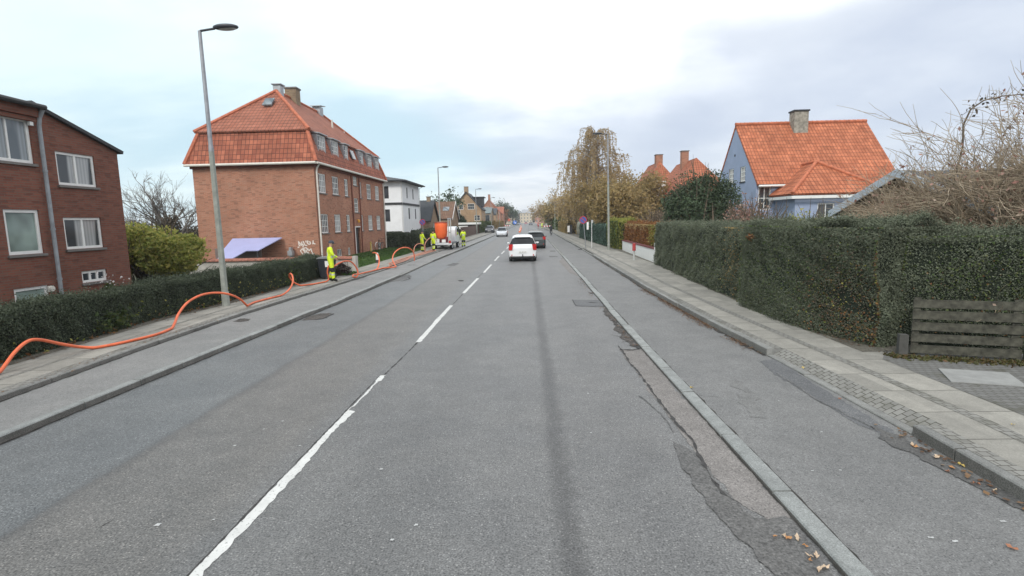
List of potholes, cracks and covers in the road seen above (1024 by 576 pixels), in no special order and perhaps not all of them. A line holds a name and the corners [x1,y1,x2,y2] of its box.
crack [615,335,734,500]
